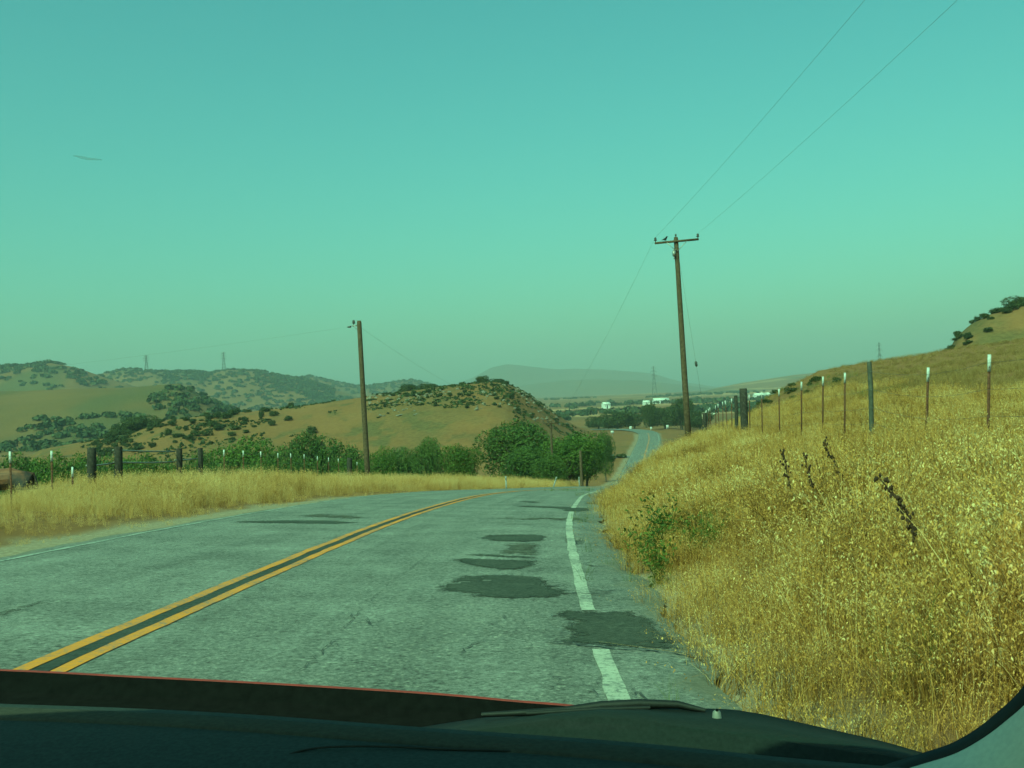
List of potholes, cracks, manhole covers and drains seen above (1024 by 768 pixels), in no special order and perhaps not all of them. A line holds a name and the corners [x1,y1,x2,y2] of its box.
crack [294,554,428,672]
